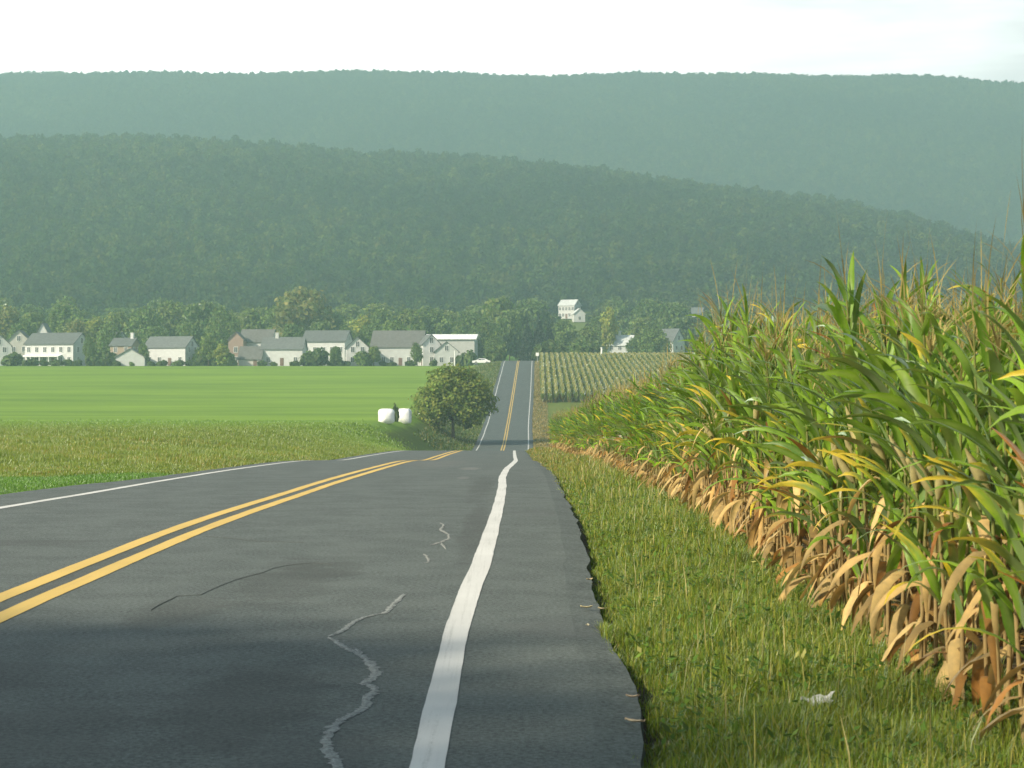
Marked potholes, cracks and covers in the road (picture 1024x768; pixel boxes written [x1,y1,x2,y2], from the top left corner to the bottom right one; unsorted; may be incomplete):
crack [319,594,406,768]
crack [423,523,450,563]
crack [151,563,333,610]
